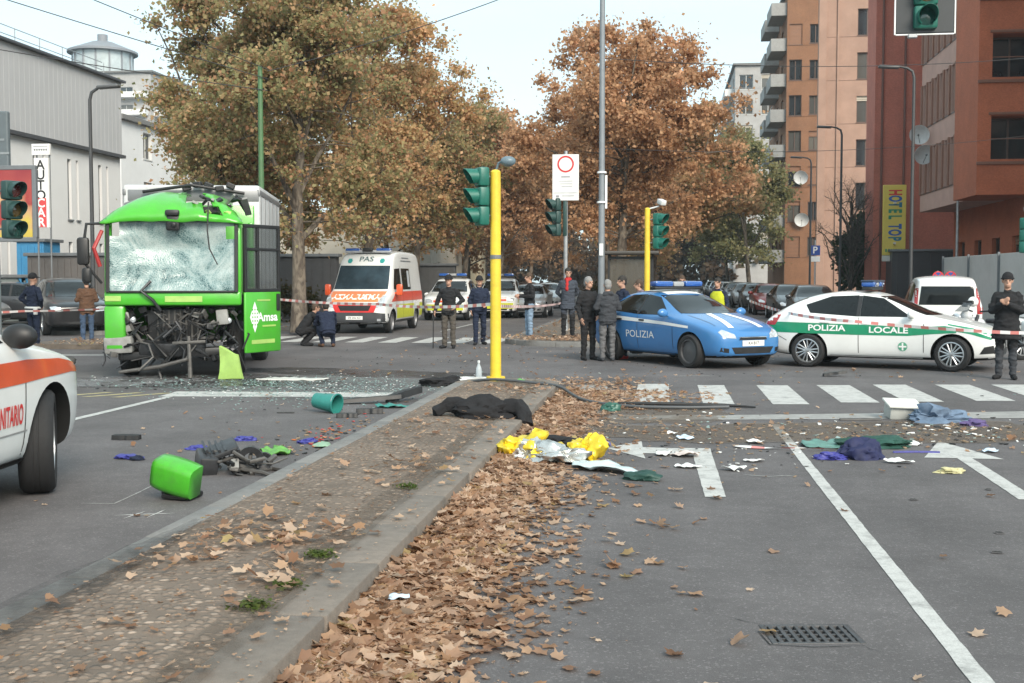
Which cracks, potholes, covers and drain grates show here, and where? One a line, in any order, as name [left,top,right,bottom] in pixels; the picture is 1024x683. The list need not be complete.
drain grate [758,624,867,644]
